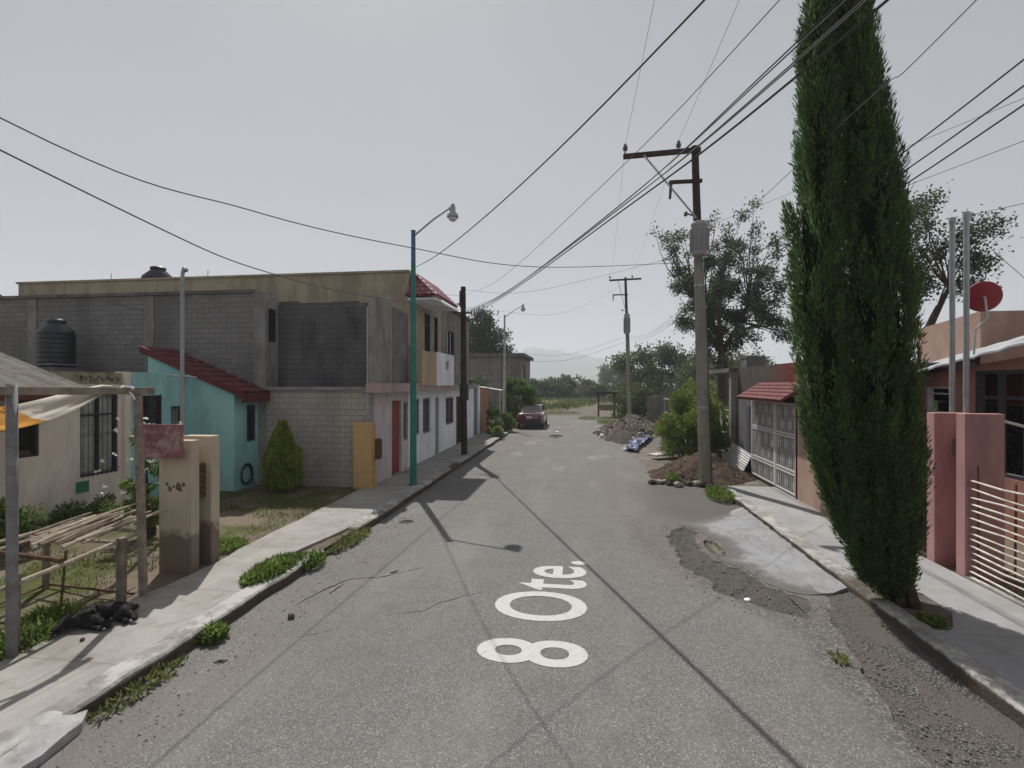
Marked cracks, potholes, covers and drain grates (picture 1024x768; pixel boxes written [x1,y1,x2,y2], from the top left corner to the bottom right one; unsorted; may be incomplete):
crack [298,567,423,604]
pothole [665,526,813,619]
